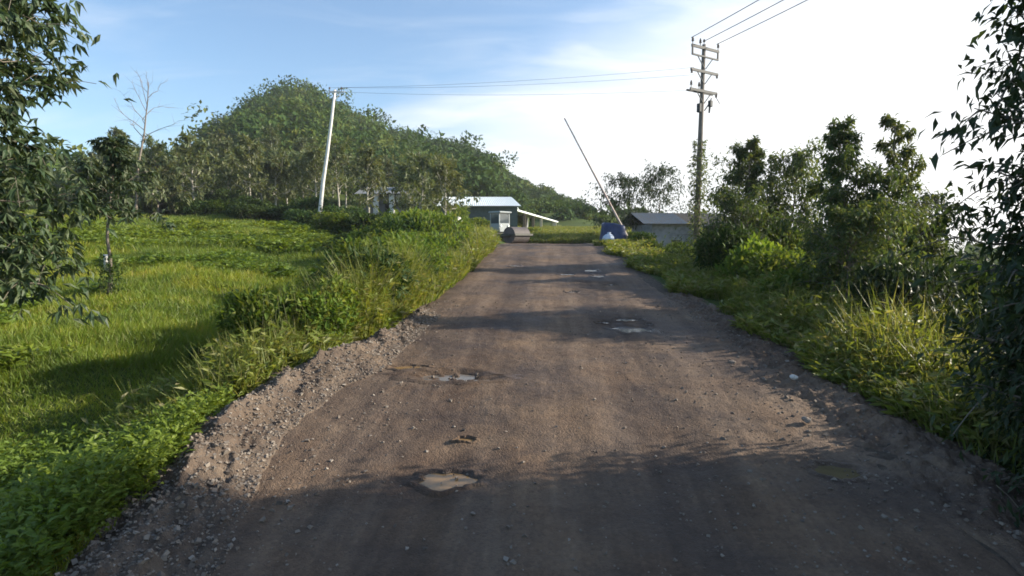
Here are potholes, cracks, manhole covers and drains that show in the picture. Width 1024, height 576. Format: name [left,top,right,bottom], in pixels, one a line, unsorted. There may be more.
pothole [800,459,875,483]
pothole [403,467,494,498]
pothole [601,322,661,335]
pothole [384,363,442,374]
pothole [449,435,480,444]
pothole [381,366,522,386]
